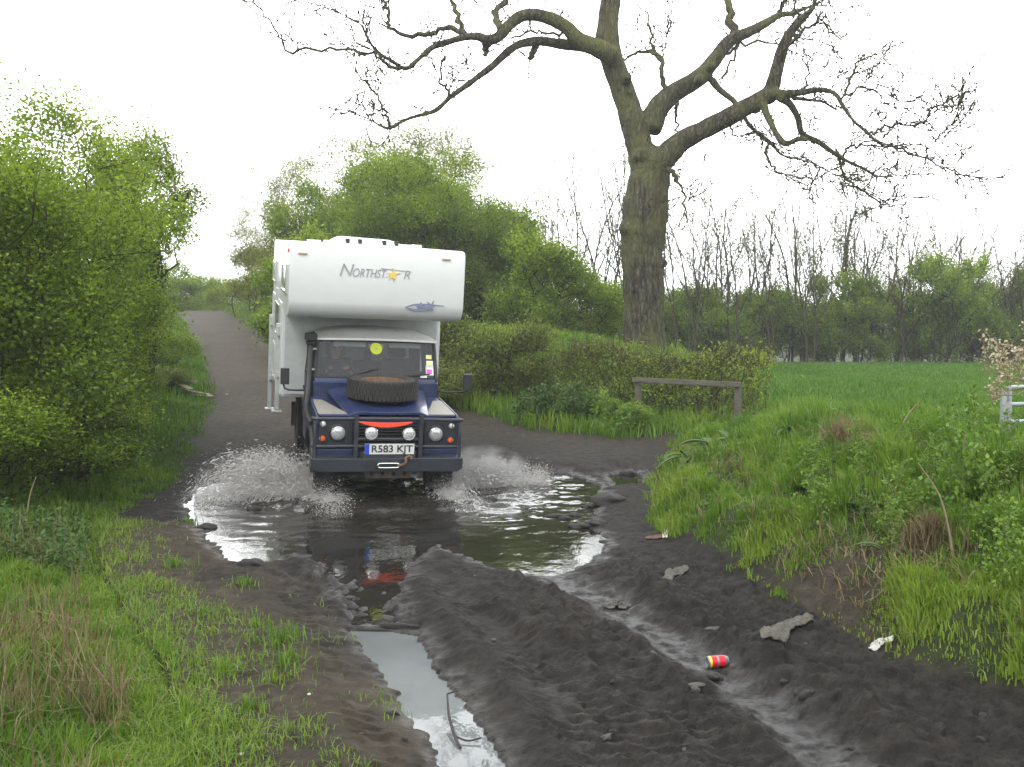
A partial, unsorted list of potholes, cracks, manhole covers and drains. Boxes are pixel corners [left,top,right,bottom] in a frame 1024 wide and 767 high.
pothole [179,468,612,626]
pothole [342,624,516,767]
